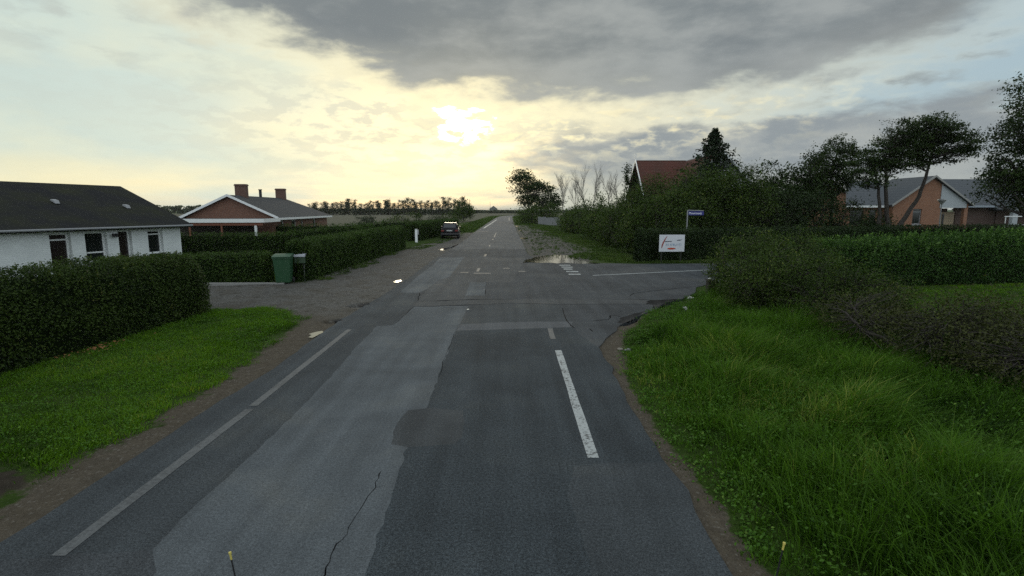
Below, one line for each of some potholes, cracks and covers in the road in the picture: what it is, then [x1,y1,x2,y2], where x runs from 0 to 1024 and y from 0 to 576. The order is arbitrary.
crack [563,287,688,332]
crack [324,472,381,576]
pothole [617,311,645,323]
